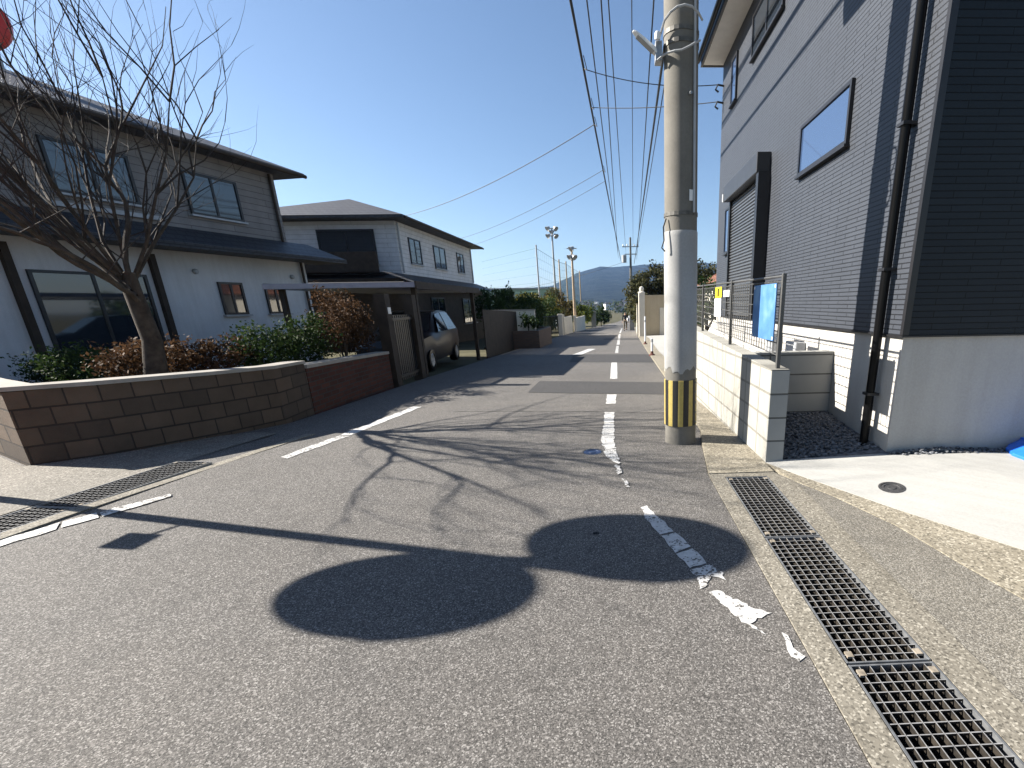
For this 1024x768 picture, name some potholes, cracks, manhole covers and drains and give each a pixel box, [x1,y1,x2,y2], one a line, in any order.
drain grate [848,661,1024,768]
drain grate [726,476,820,538]
drain grate [34,461,212,508]
manhole cover [878,482,906,493]
drain grate [0,506,74,533]
drain grate [765,536,931,666]
